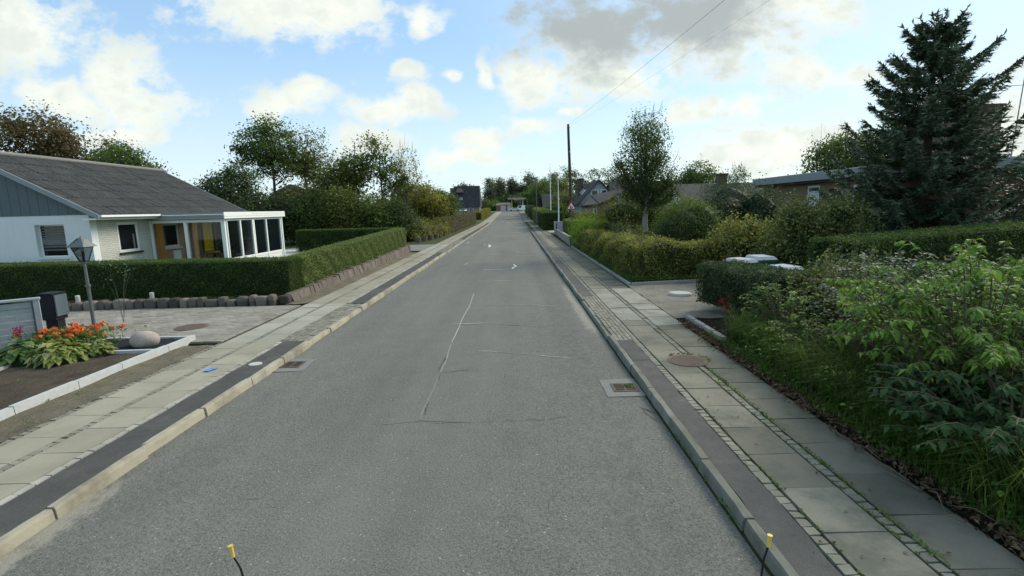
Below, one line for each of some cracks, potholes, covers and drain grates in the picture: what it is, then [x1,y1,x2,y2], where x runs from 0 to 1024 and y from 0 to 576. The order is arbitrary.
manhole cover [173,323,210,331]
drain grate [273,359,317,373]
manhole cover [667,355,708,368]
drain grate [599,378,646,397]
